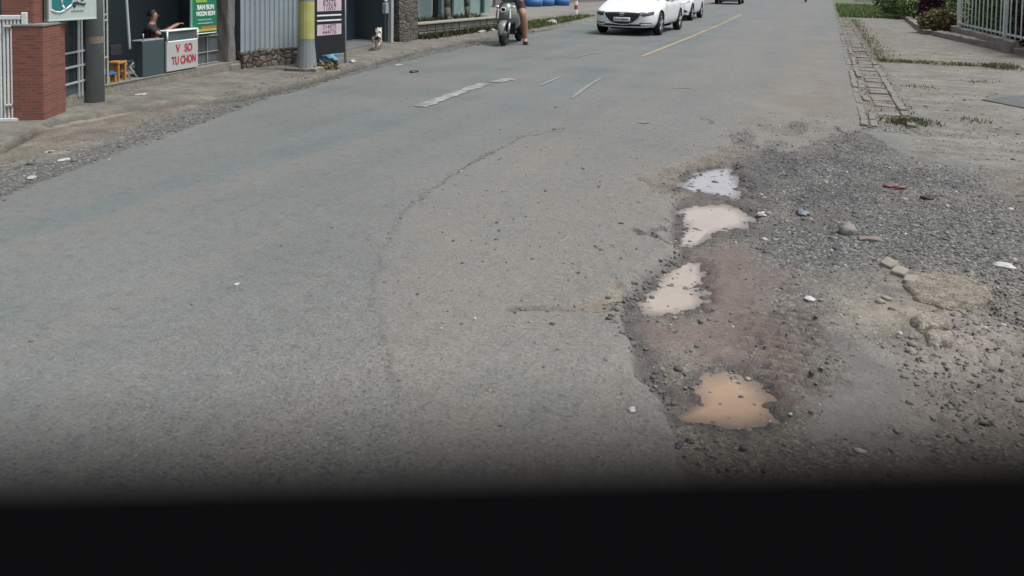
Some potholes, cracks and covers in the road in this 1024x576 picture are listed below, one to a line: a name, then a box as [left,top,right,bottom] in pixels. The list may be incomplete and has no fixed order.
pothole [665,160,760,201]
pothole [648,352,811,427]
pothole [660,197,767,252]
pothole [618,246,727,325]
crack [501,303,557,314]
